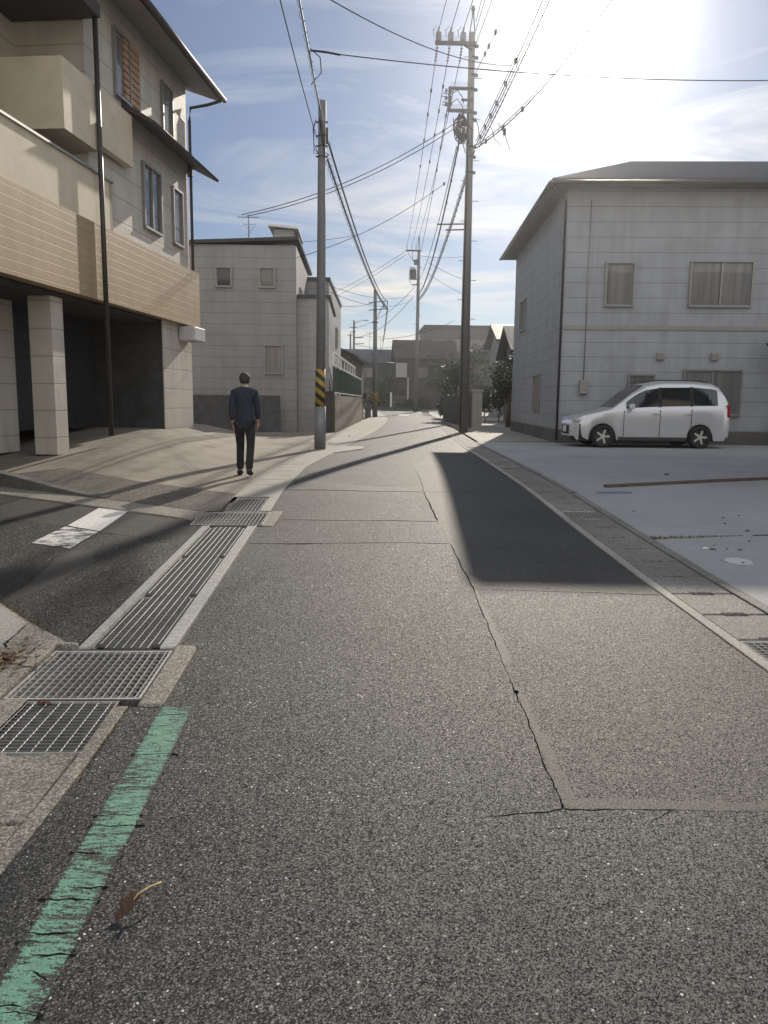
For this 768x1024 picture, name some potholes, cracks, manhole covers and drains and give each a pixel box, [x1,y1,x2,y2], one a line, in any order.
manhole cover [721,557,757,566]
drain grate [92,596,196,649]
drain grate [740,641,768,661]
drain grate [180,526,246,559]
crack [248,542,730,821]
crack [3,624,44,651]
drain grate [0,701,119,757]
drain grate [143,557,224,598]
drain grate [561,511,609,519]
drain grate [190,512,271,525]
drain grate [225,498,269,512]
